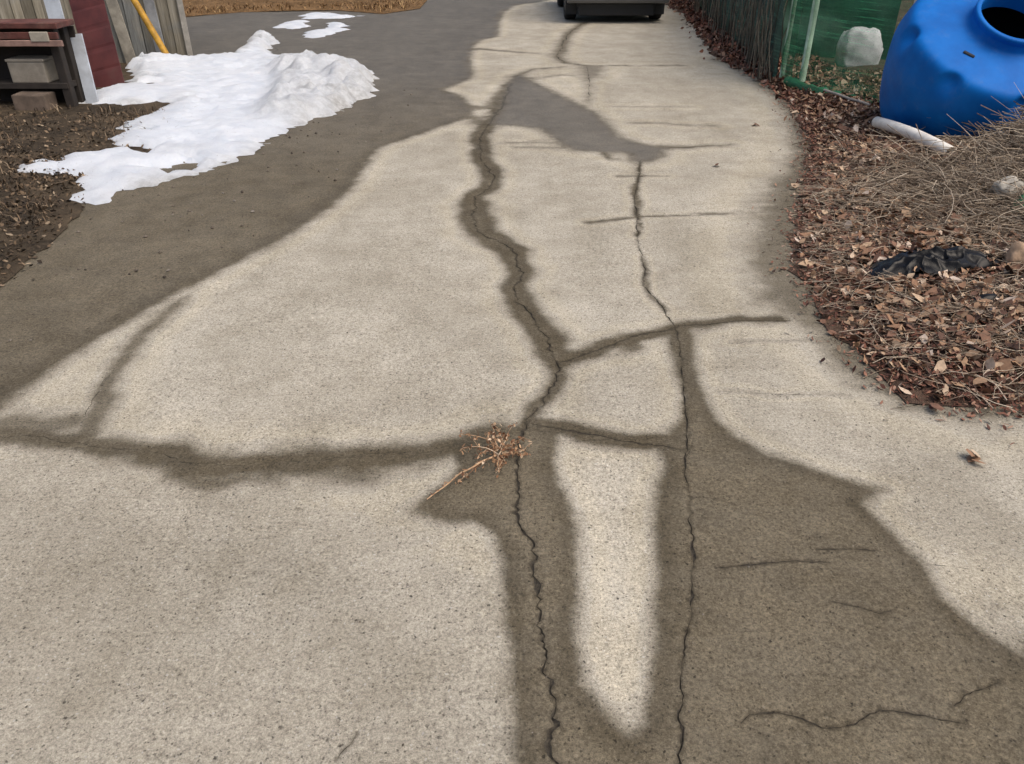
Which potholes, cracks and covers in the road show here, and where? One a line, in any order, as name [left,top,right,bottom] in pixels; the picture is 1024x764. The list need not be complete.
crack [0,87,771,764]
crack [718,549,876,568]
crack [741,682,999,729]
